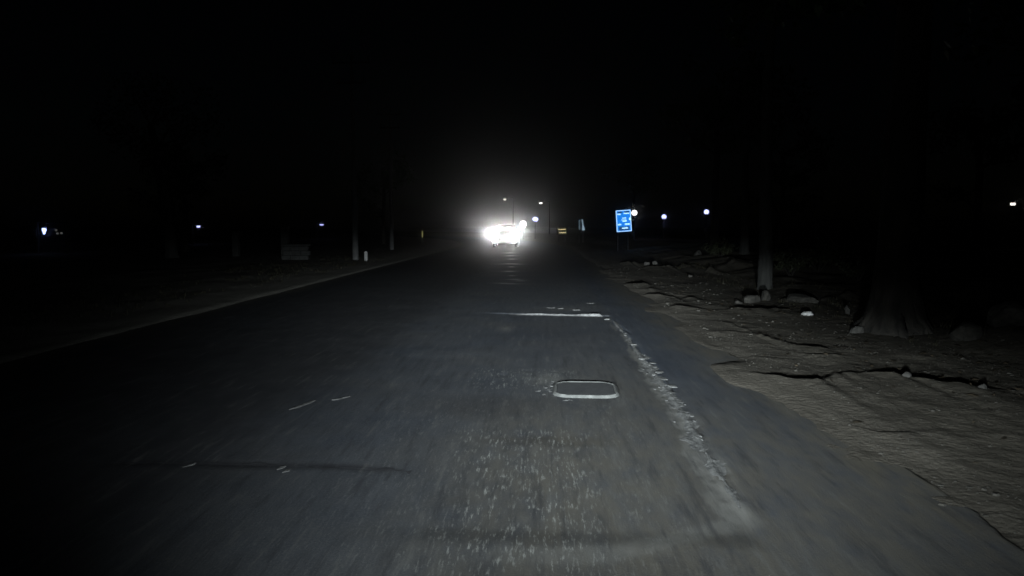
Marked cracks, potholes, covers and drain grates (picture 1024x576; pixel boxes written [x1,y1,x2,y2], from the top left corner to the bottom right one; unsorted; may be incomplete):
manhole cover [538,381,619,401]
